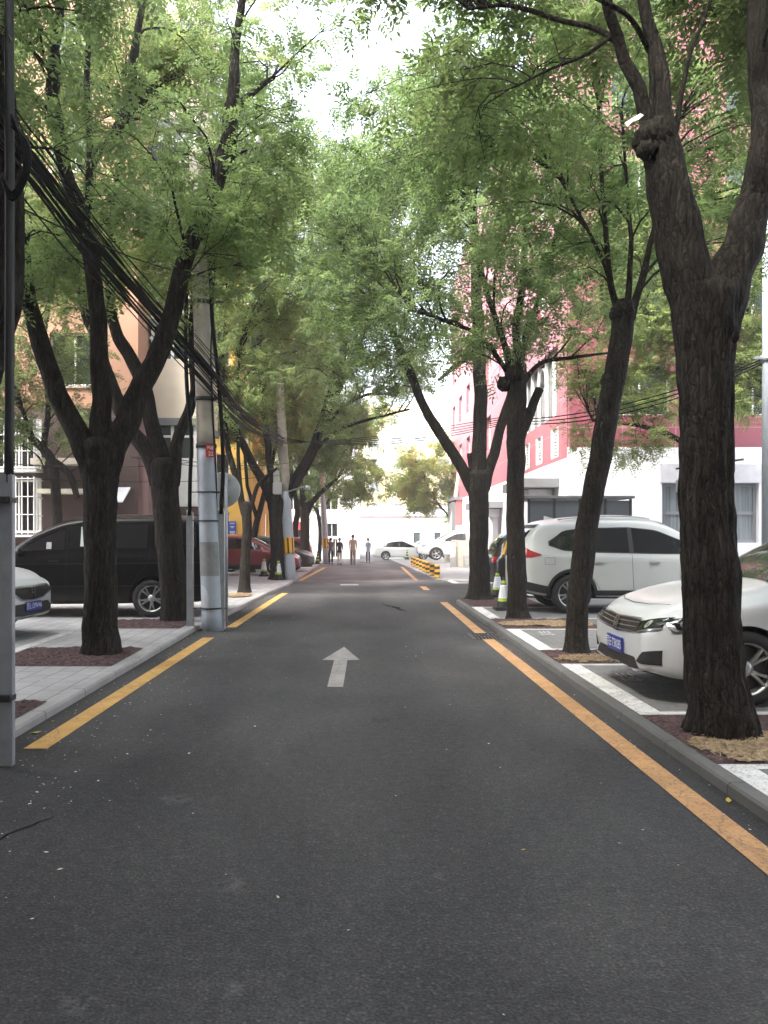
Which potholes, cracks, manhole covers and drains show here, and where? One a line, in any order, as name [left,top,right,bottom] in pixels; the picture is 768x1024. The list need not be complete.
crack [0,817,54,841]
